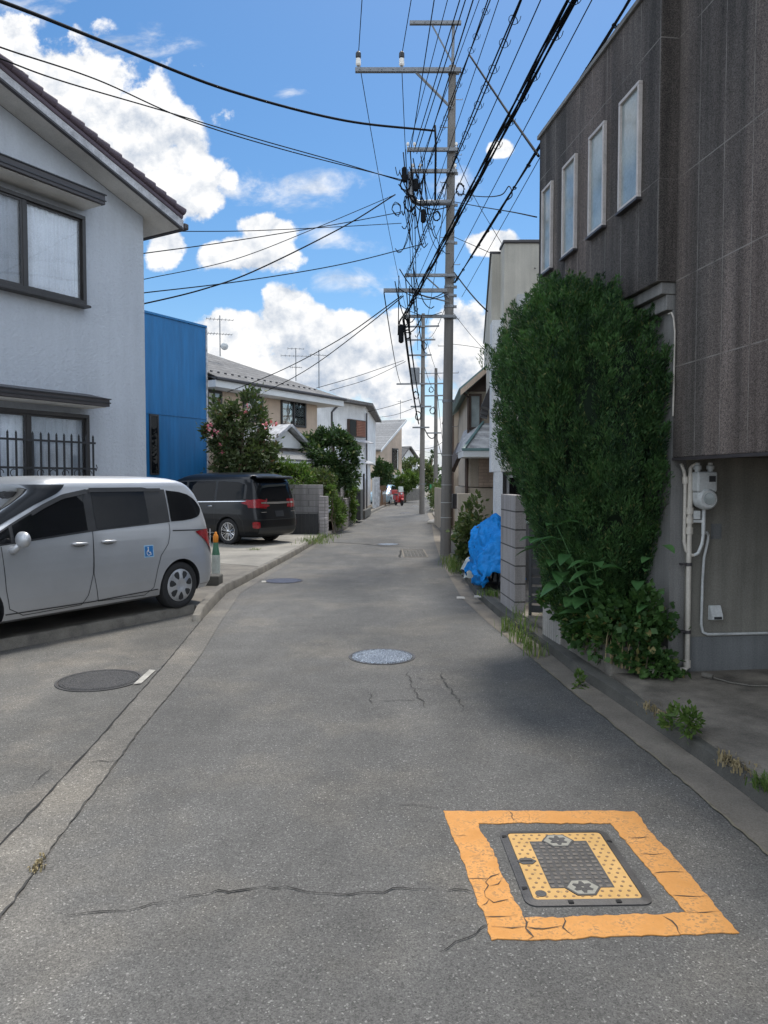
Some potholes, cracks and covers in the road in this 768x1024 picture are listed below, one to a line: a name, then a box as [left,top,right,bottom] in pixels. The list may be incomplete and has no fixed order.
manhole cover [54,669,143,692]
manhole cover [349,649,415,665]
crack [369,672,464,708]
manhole cover [500,830,652,907]
crack [67,874,572,952]
